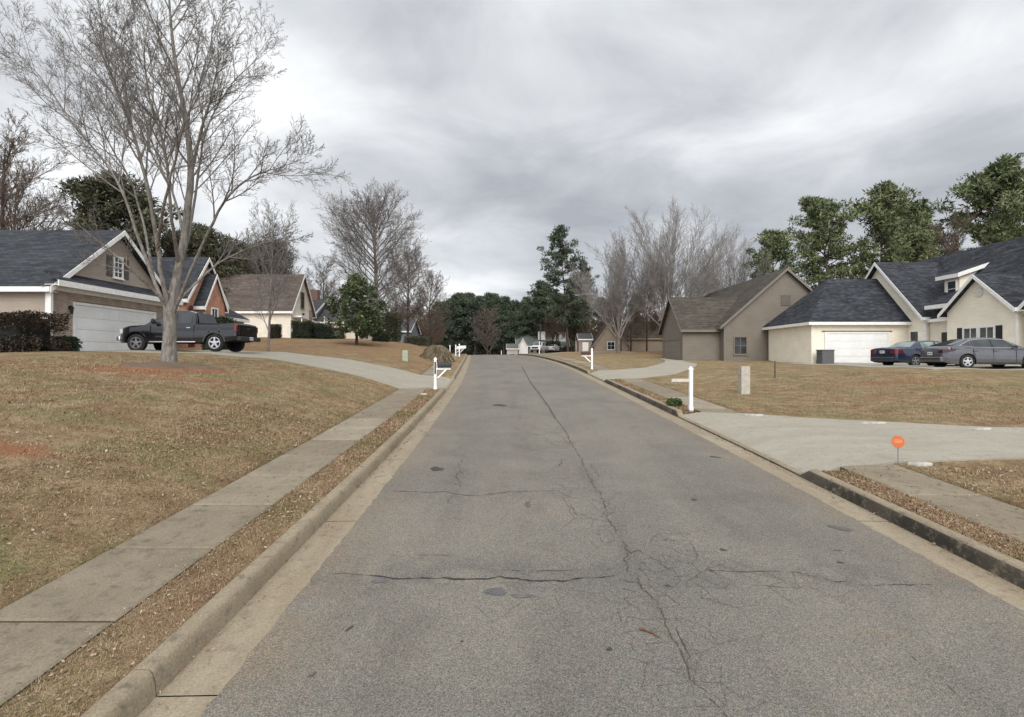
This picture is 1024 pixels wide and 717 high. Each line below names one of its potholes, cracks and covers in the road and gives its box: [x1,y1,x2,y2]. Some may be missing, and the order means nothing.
crack [333,367,933,717]
